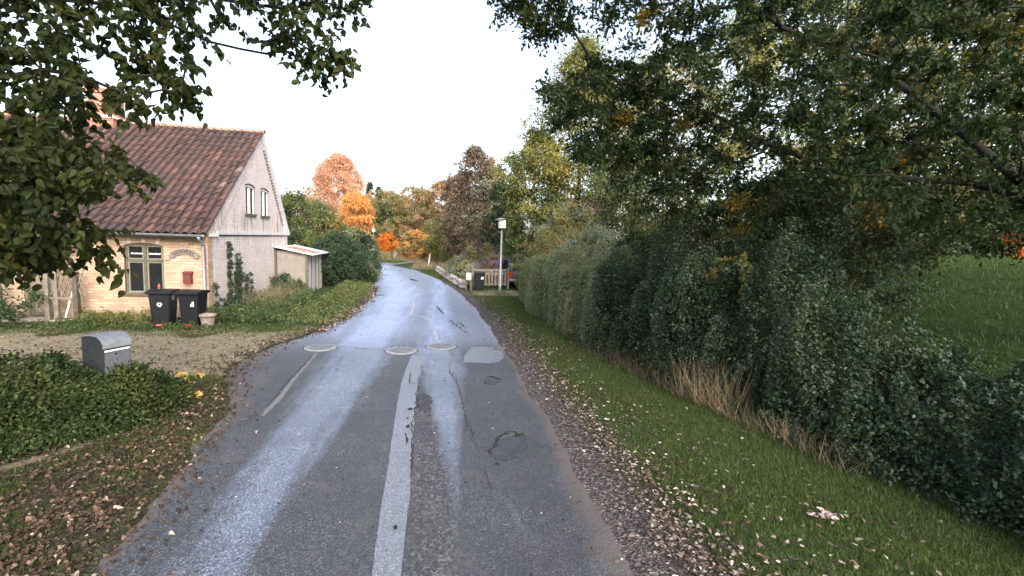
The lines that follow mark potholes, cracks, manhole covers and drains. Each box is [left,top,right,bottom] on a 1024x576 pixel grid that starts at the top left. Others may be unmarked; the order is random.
manhole cover [303,344,338,352]
pothole [490,432,528,460]
manhole cover [384,347,418,355]
crack [449,364,526,493]
crack [404,372,419,484]
